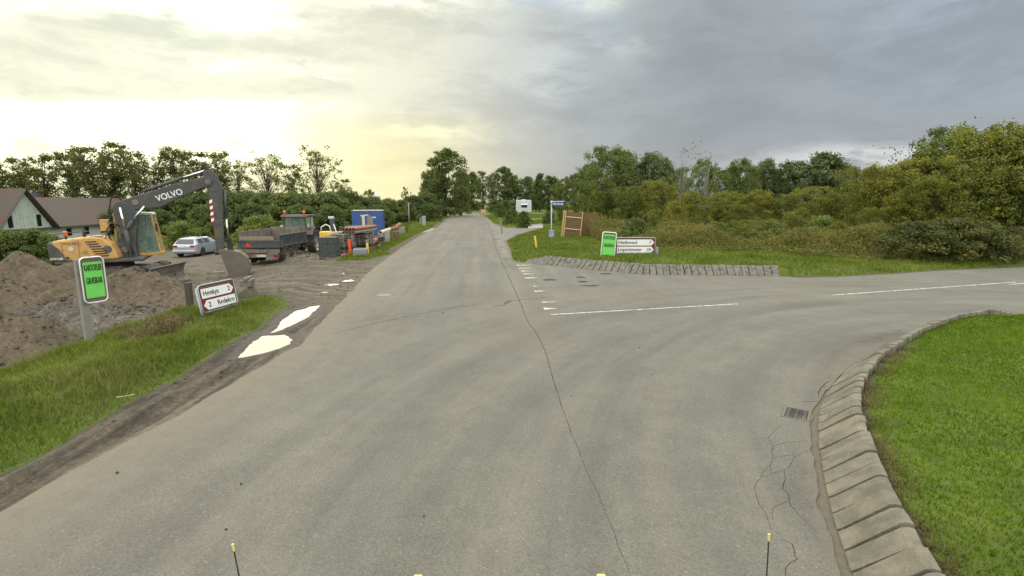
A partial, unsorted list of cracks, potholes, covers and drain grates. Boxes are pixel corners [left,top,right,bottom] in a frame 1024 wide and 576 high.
drain grate [781,406,812,422]
crack [754,427,817,532]
crack [493,261,629,571]
